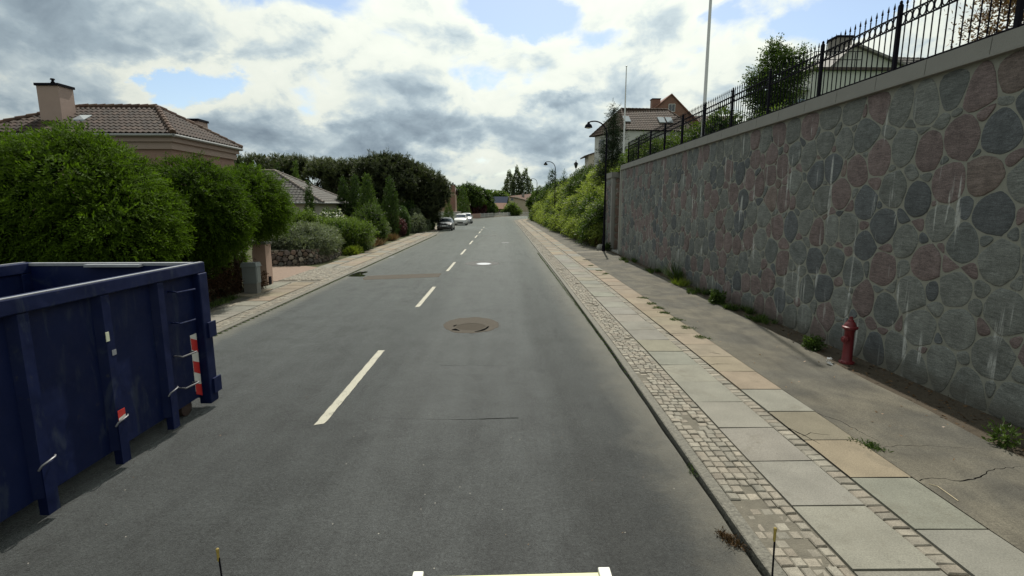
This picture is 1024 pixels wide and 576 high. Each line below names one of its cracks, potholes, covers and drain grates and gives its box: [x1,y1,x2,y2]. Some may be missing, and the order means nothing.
crack [788,413,968,449]
crack [919,467,1014,483]
manhole cover [455,323,487,331]
